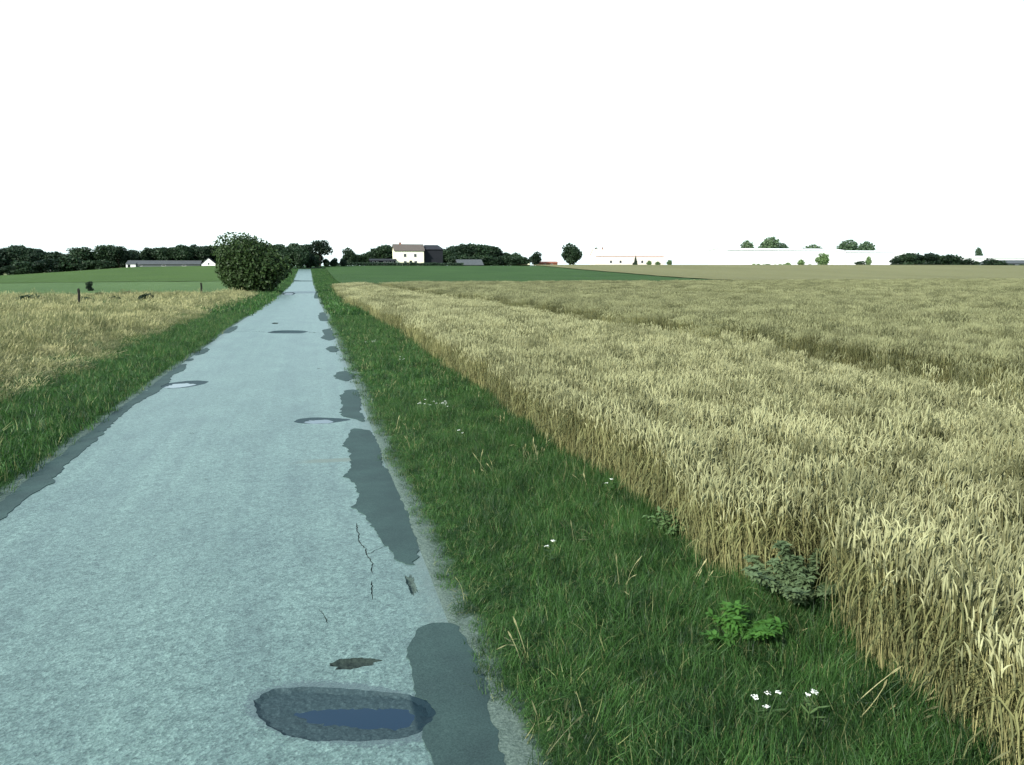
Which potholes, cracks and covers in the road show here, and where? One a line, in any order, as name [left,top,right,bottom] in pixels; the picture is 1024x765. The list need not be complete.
pothole [253,687,436,741]
pothole [161,380,209,389]
crack [356,523,385,600]
